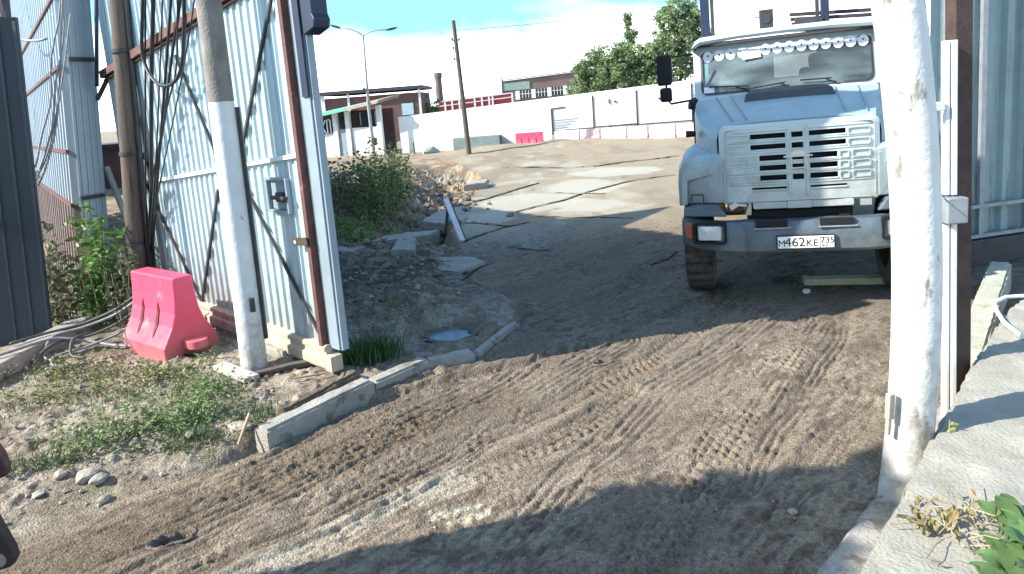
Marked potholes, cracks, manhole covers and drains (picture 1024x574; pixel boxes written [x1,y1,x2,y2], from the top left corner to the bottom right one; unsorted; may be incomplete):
crack [467,216,622,251]
crack [470,156,677,206]
